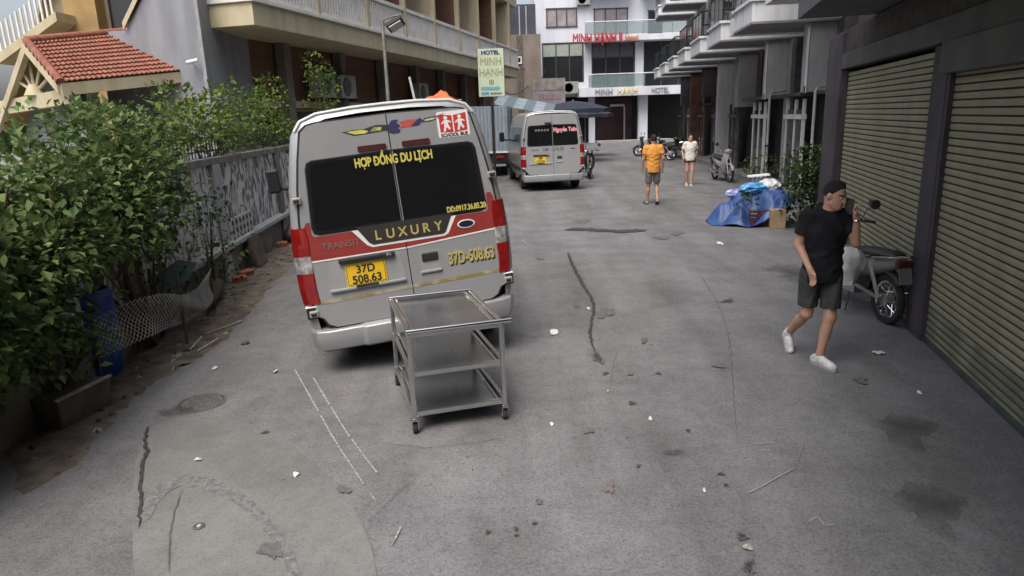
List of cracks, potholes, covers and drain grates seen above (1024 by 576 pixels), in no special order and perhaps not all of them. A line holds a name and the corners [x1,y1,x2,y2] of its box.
crack [134,426,301,576]
crack [567,252,598,356]
manhole cover [175,393,227,413]
